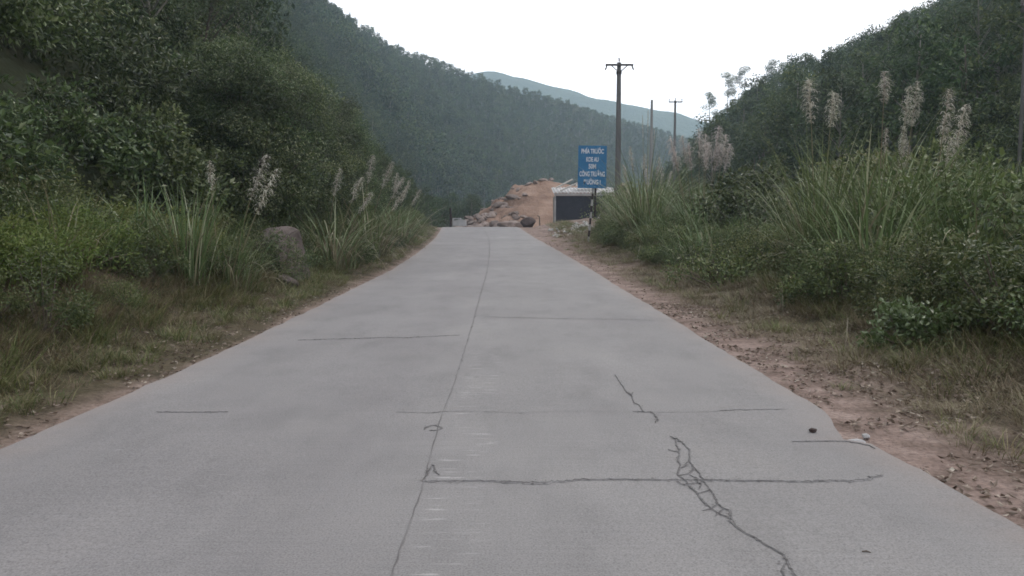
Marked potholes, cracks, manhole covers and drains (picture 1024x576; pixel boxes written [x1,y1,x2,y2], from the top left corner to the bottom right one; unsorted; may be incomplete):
crack [424,375,874,576]
